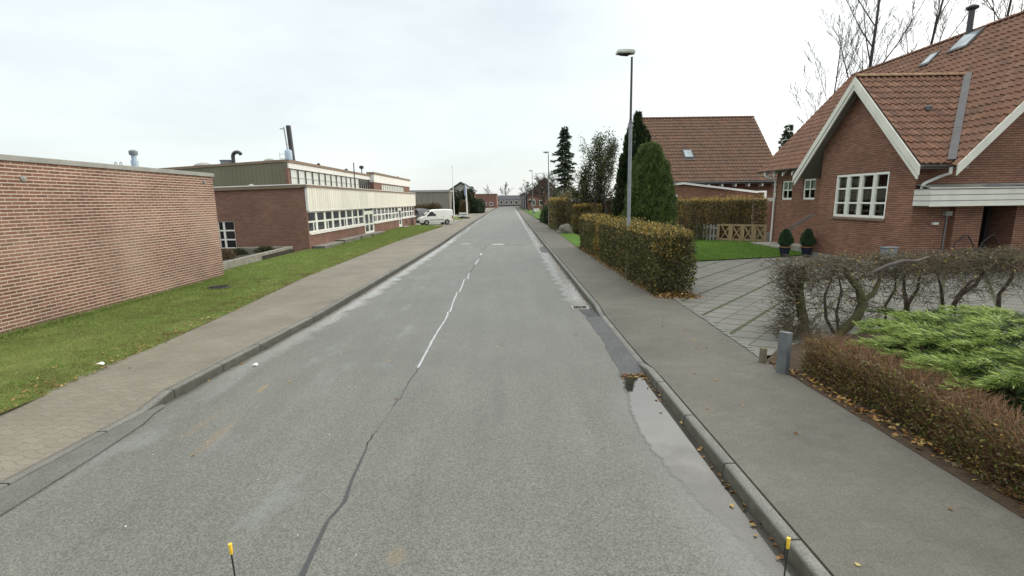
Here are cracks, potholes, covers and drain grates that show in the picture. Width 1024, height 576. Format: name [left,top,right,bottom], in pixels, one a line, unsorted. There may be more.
crack [299,245,487,576]
